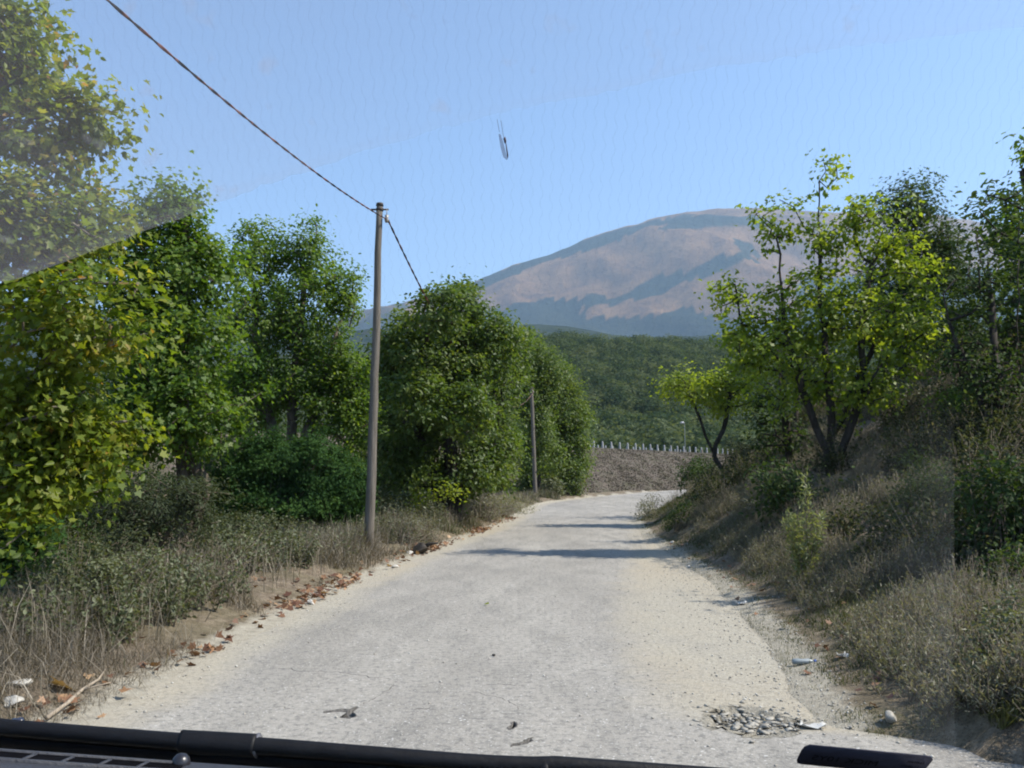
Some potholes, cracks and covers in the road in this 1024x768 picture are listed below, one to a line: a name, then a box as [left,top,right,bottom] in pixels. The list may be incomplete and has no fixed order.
pothole [669,695,861,744]
crack [280,668,396,705]
